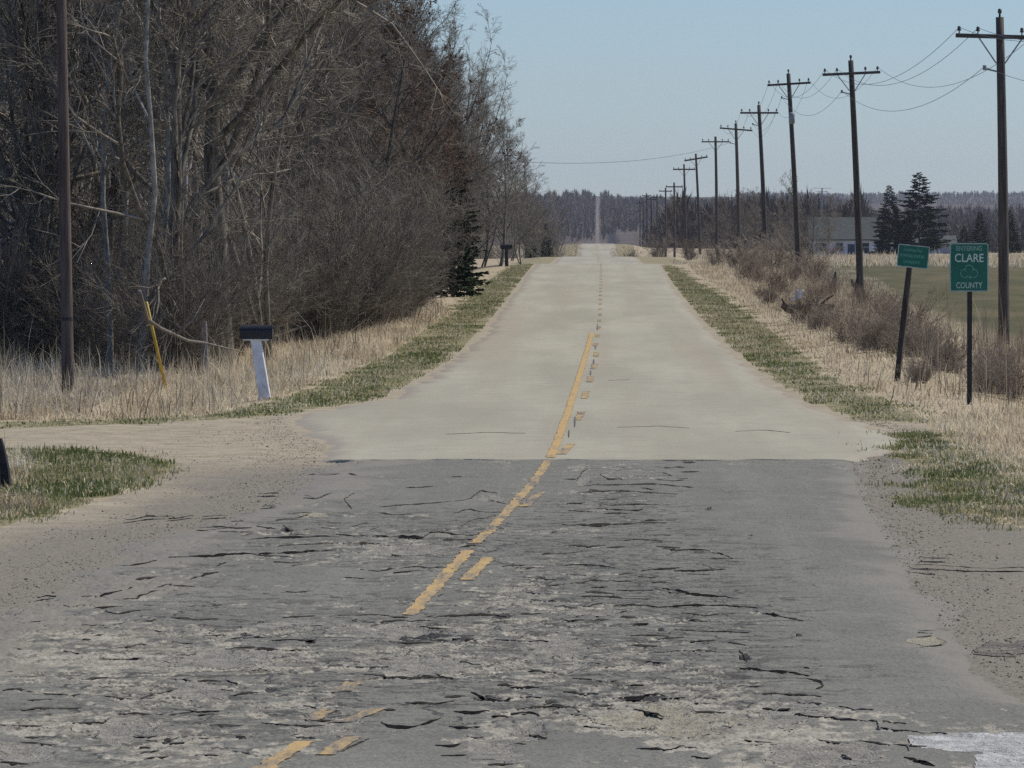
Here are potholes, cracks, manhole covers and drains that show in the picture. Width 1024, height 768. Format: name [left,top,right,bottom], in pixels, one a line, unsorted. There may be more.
crack [0,460,948,766]
crack [915,557,1024,571]
